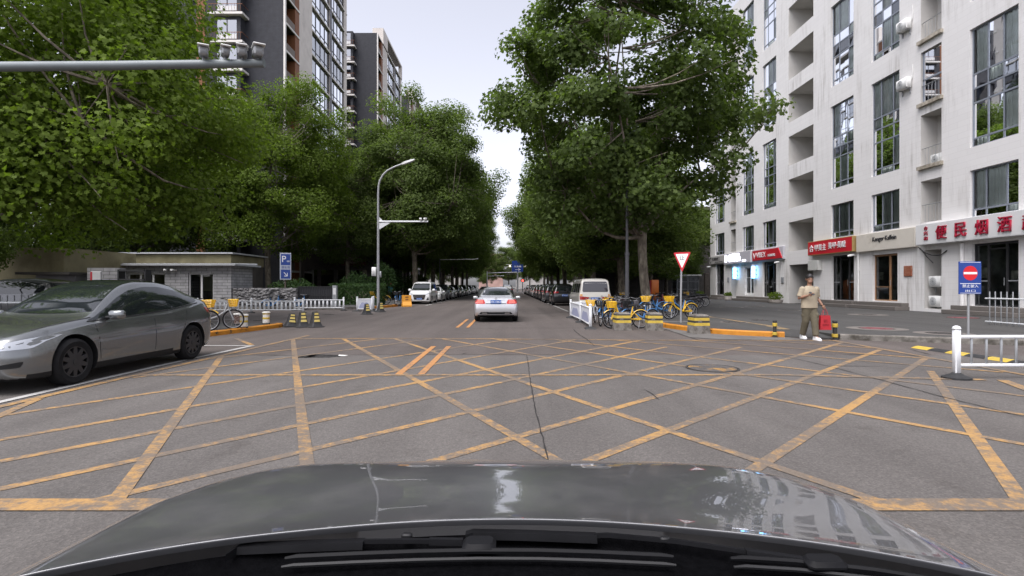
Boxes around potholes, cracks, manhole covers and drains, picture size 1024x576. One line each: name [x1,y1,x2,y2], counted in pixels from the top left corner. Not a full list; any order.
crack [527,357,549,460]
manhole cover [685,364,740,372]
